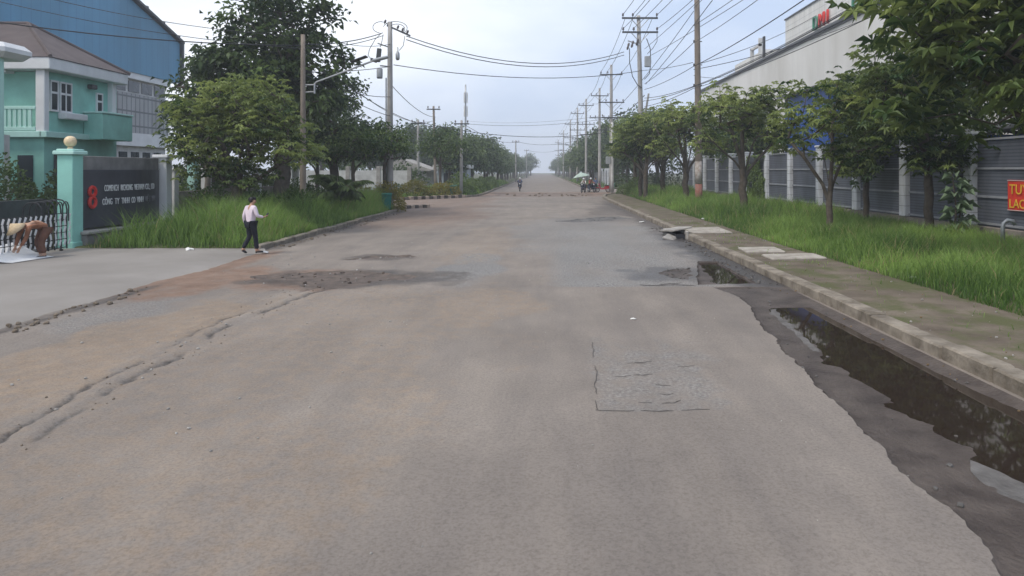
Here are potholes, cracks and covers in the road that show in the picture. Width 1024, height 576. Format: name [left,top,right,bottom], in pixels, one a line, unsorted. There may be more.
drain grate [660,226,692,240]
pothole [250,271,417,290]
pothole [713,287,1024,576]
pothole [696,261,756,285]
crack [592,342,710,411]
